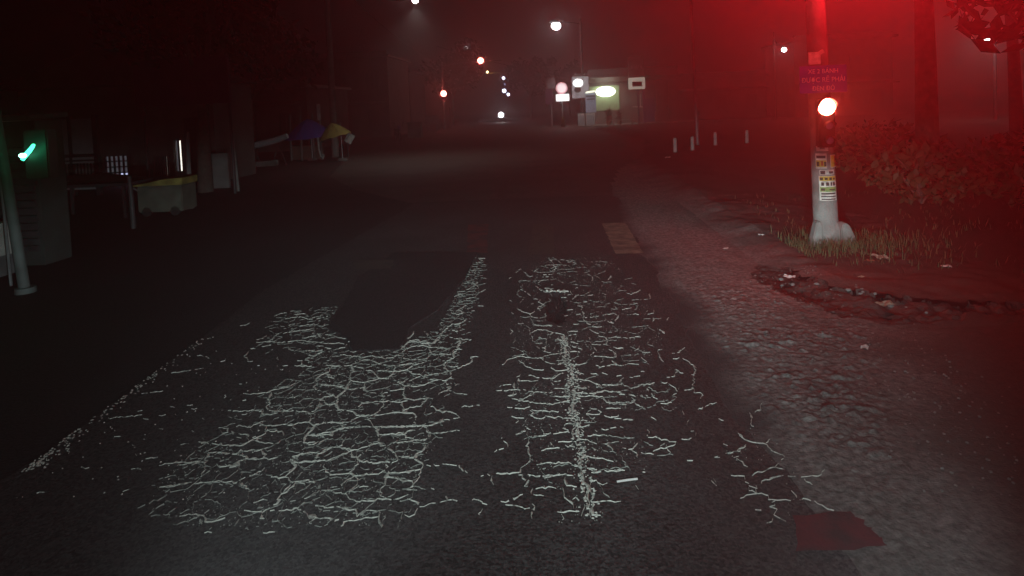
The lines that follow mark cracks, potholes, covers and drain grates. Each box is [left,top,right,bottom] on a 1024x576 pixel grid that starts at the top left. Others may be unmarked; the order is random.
pothole [749,265,1024,325]
crack [22,258,487,534]
crack [711,403,834,523]
crack [481,257,723,526]
pothole [545,289,569,325]
